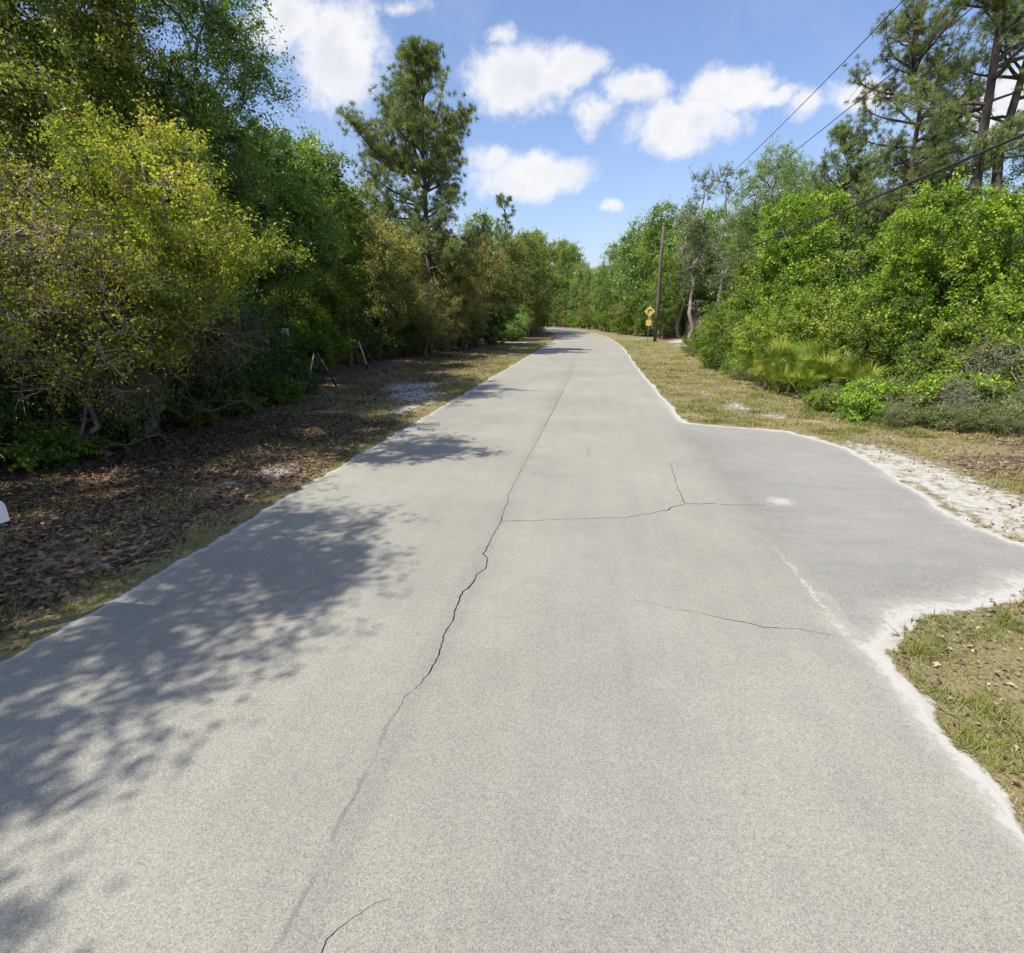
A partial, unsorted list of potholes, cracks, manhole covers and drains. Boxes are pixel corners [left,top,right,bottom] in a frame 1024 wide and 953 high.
crack [393,369,728,717]
crack [634,599,847,638]
crack [321,899,389,953]
